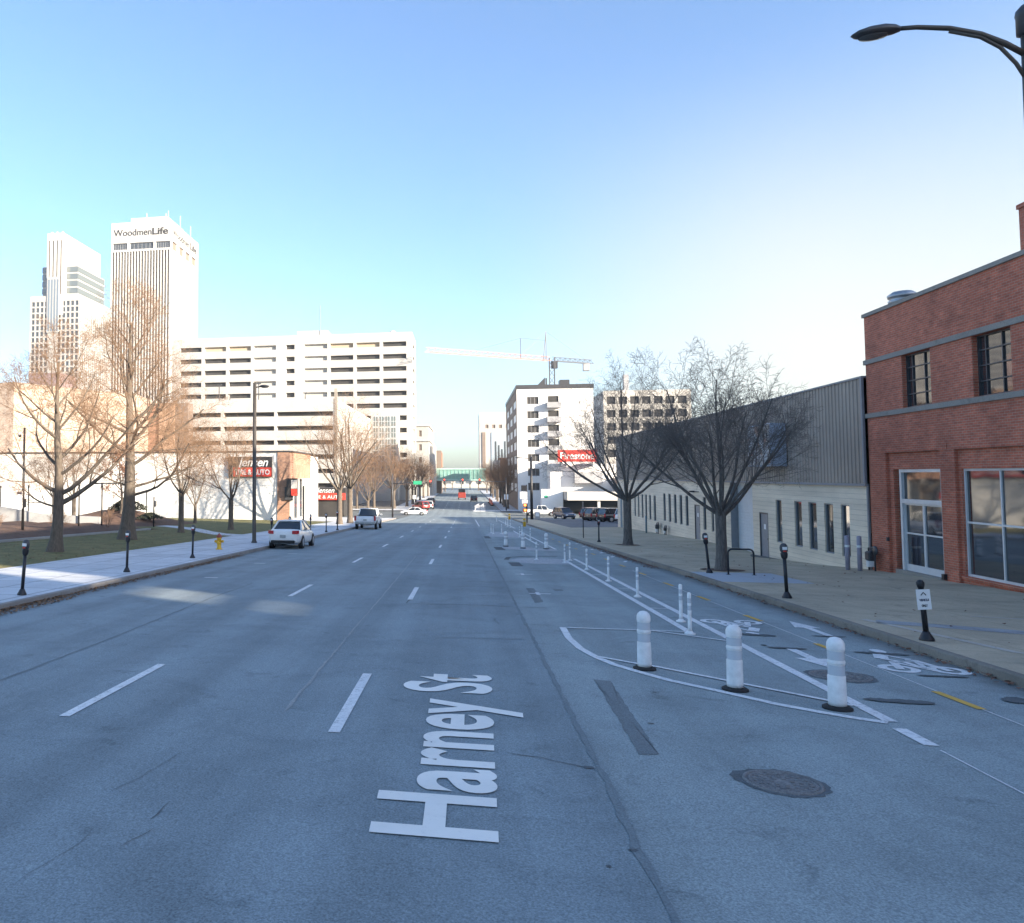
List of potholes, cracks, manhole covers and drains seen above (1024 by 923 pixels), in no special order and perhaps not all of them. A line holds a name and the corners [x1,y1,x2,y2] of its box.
manhole cover [729,769,833,798]
manhole cover [803,669,879,683]
